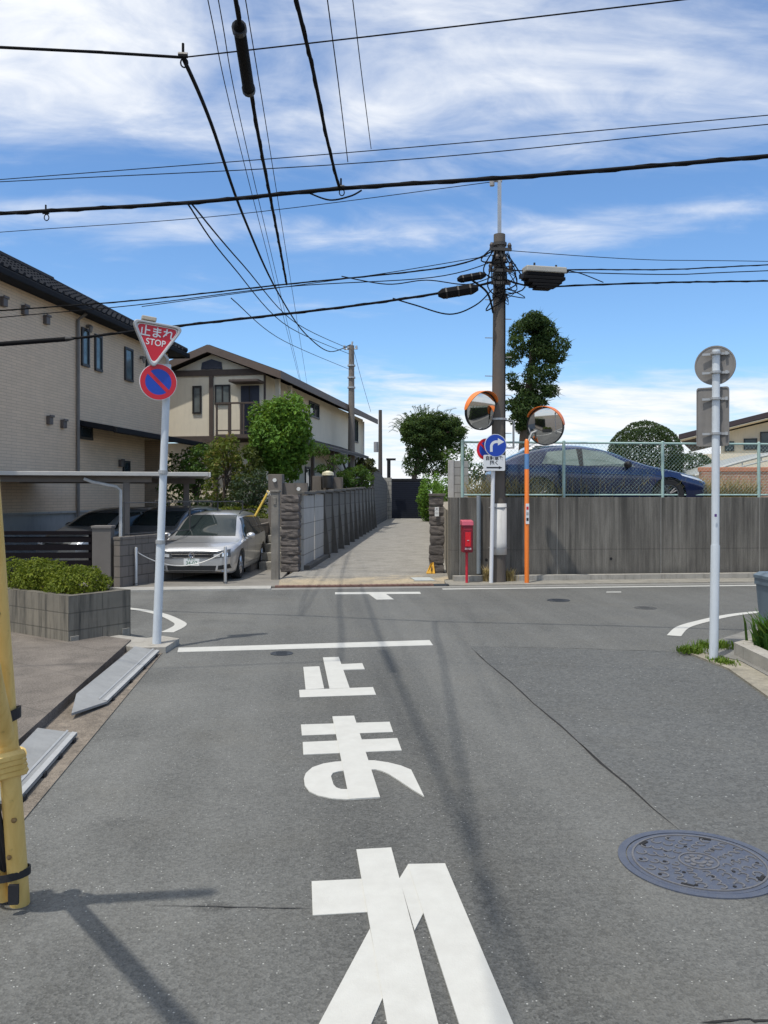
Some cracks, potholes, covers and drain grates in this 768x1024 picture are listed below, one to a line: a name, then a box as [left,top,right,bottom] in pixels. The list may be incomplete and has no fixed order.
manhole cover [618,830,768,900]
